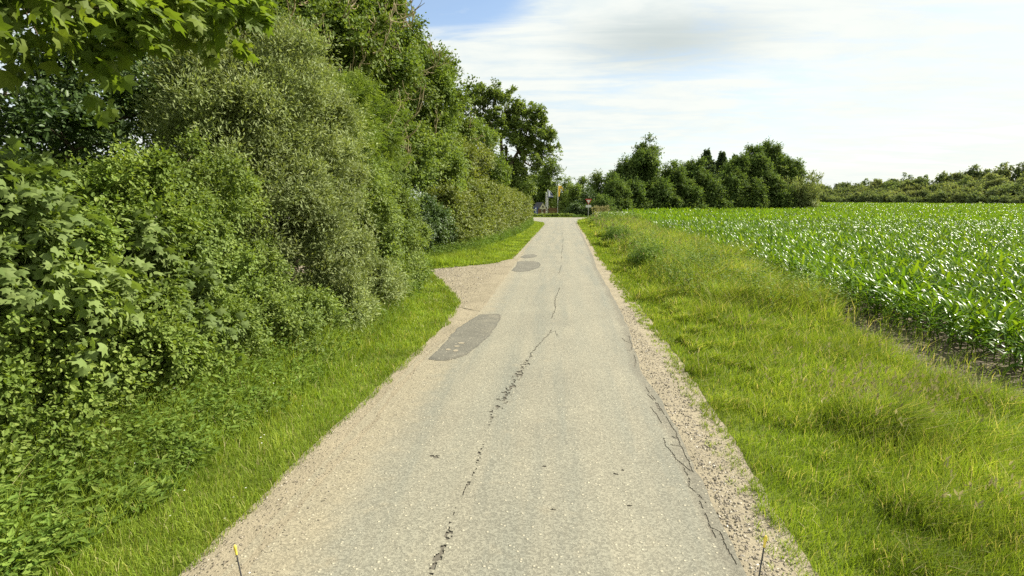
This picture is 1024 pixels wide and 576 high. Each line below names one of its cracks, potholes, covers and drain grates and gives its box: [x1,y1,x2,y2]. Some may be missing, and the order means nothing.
crack [429,233,563,575]
crack [646,387,737,565]
